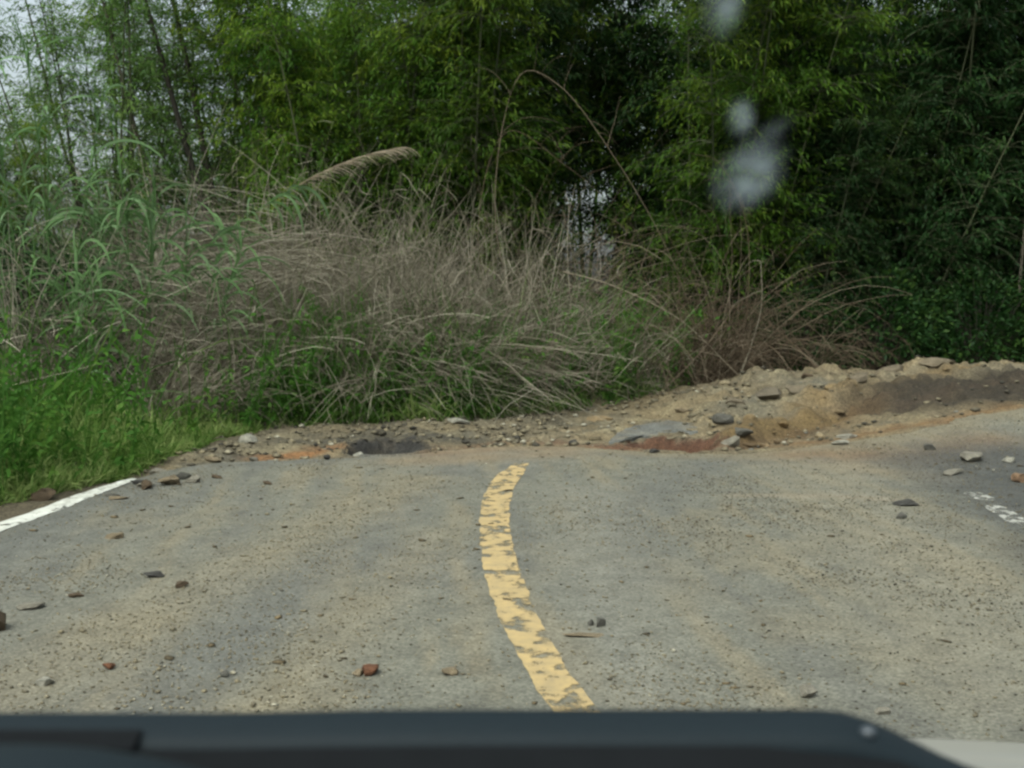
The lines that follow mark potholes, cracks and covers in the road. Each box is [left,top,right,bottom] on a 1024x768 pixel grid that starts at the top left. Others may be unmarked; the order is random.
pothole [338,434,441,458]
